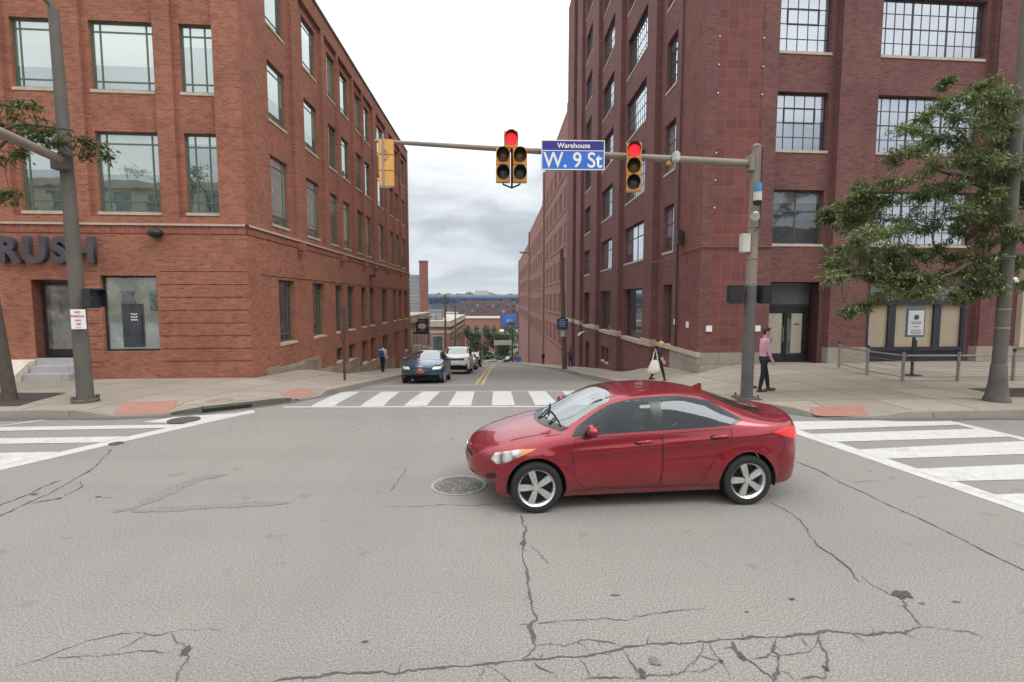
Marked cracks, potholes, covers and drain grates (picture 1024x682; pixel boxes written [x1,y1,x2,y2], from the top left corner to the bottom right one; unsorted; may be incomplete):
crack [18,629,220,682]
pothole [892,590,913,599]
crack [0,450,112,516]
drain grate [171,397,292,415]
crack [272,503,986,682]
manhole cover [431,475,487,496]
